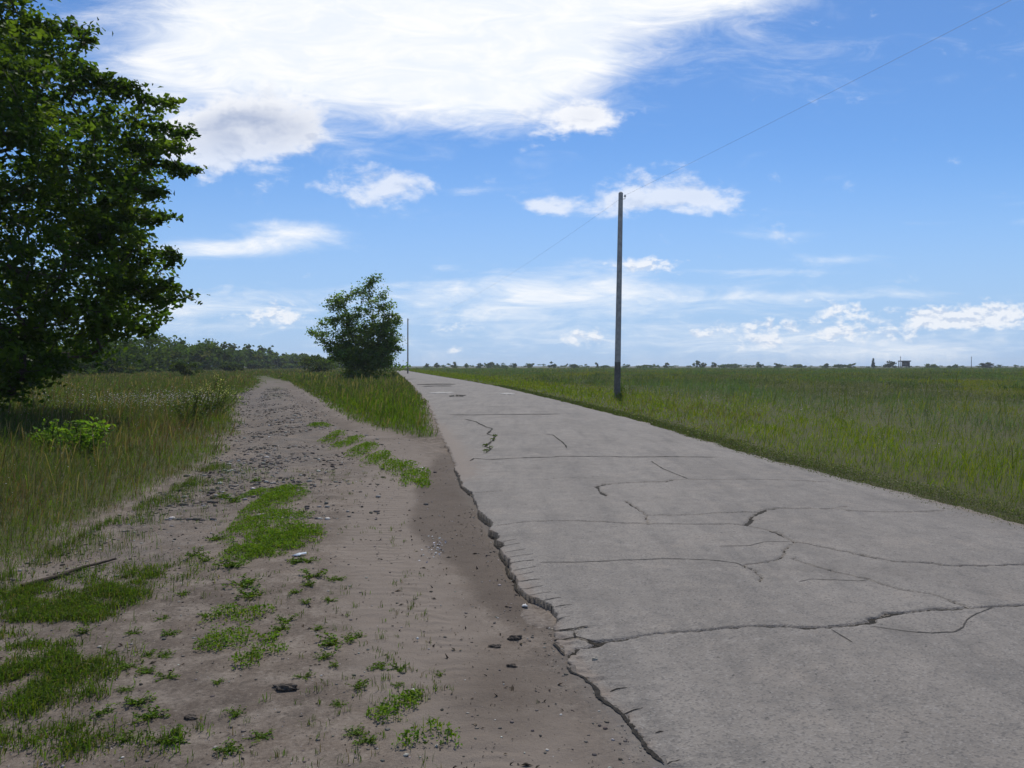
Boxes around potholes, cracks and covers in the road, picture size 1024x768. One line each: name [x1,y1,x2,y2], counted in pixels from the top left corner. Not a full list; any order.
crack [454,419,1019,764]
